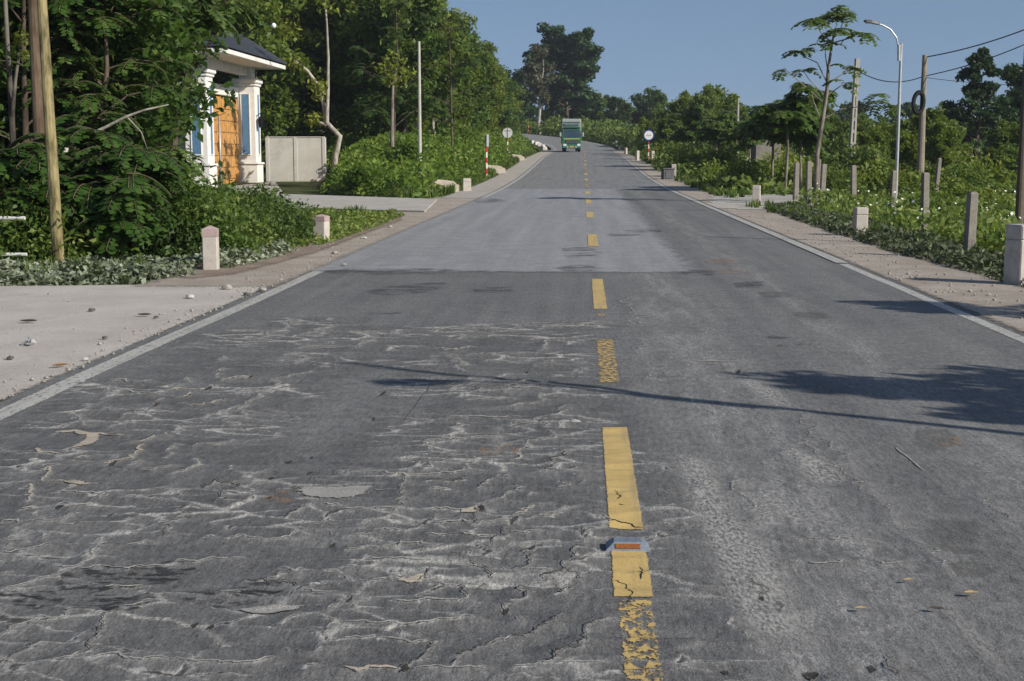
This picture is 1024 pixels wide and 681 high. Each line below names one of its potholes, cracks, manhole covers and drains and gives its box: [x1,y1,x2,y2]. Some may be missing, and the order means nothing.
crack [0,322,635,673]
